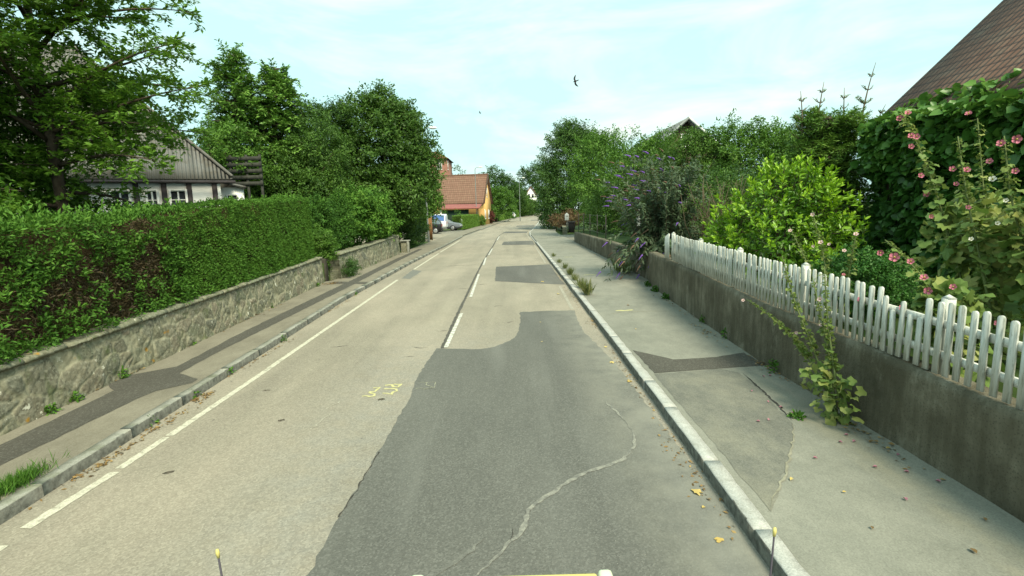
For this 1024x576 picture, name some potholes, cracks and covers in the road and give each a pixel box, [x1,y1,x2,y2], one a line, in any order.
crack [435,402,636,576]
crack [747,377,795,511]
